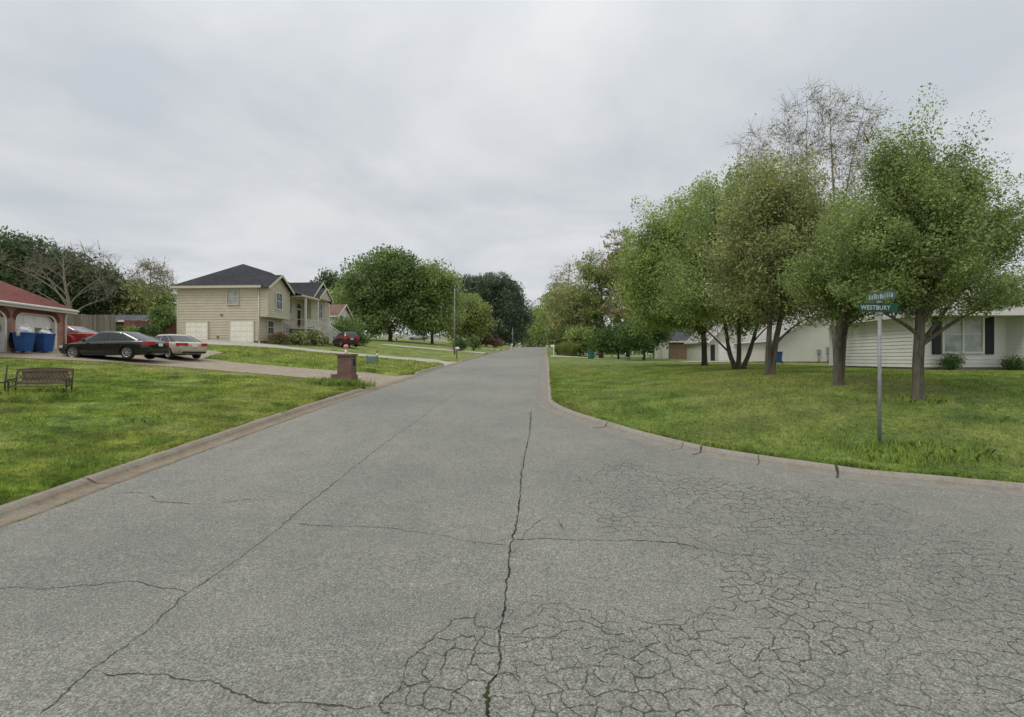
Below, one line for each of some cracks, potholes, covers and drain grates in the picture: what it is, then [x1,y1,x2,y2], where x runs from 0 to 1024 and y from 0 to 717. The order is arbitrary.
crack [300,461,1024,582]
crack [102,612,500,717]
crack [7,581,187,592]
